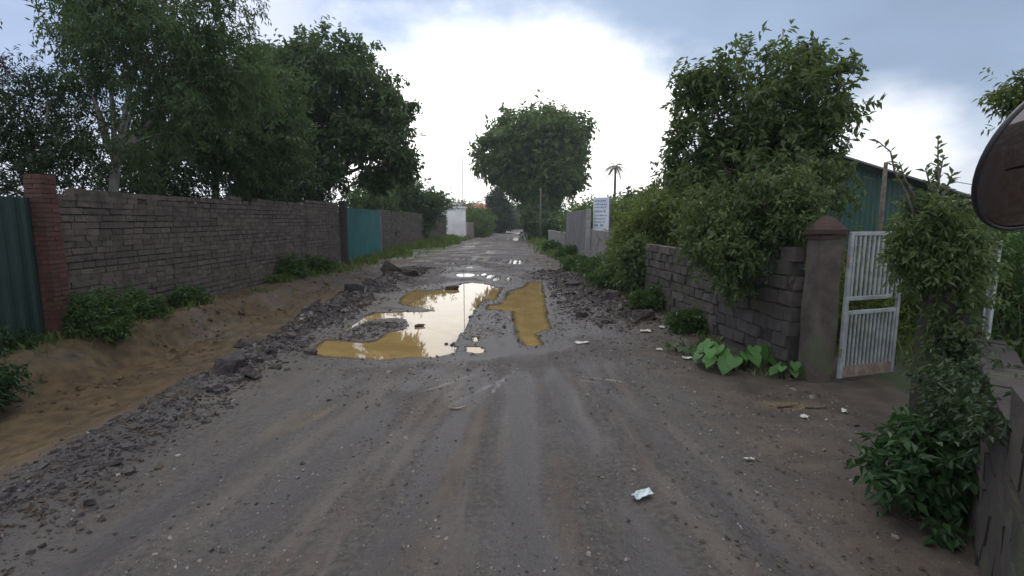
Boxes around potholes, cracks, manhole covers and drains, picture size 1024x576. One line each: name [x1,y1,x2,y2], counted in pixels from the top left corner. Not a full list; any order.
pothole [483,281,559,348]
pothole [299,282,511,363]
